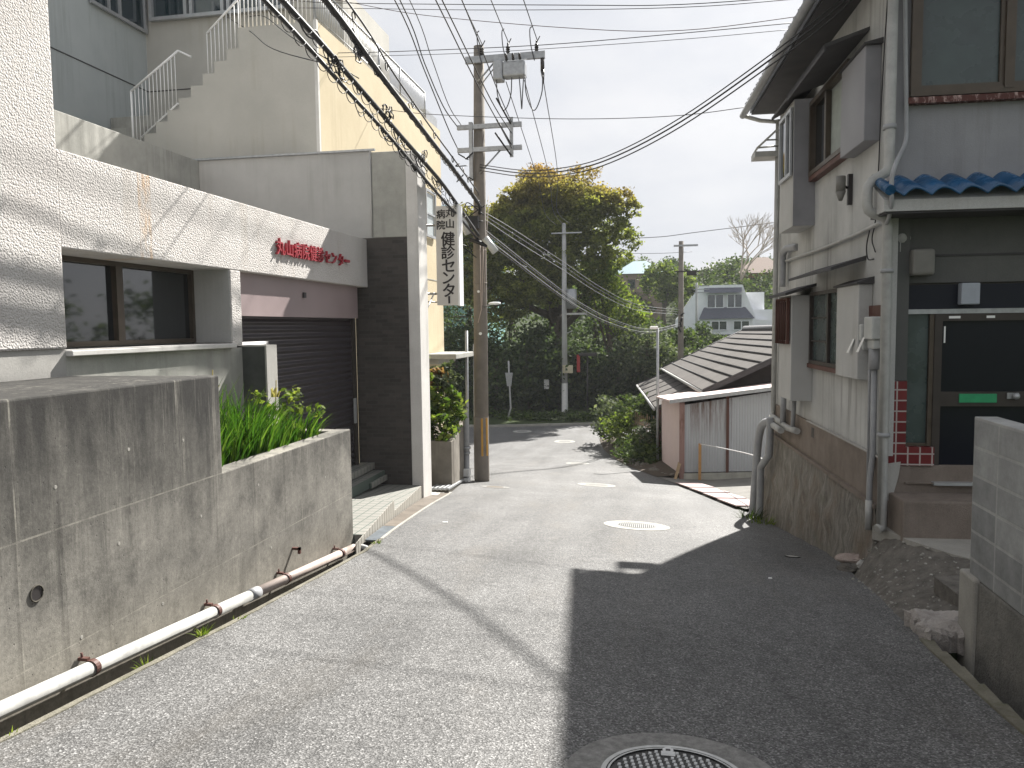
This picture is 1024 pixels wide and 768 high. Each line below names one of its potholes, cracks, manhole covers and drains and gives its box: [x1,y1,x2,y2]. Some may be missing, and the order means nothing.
manhole cover [564,733,772,768]
manhole cover [604,521,670,531]
